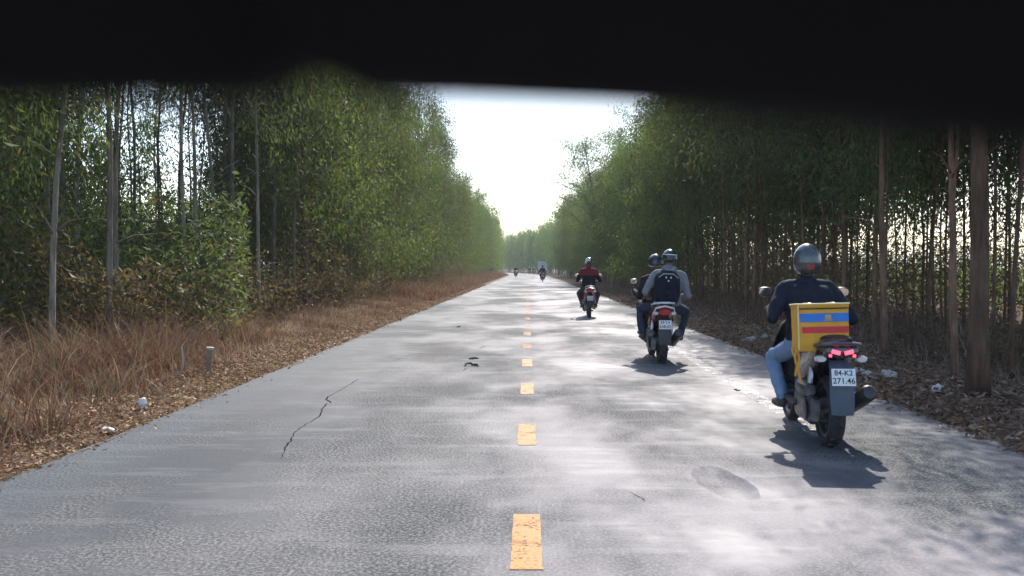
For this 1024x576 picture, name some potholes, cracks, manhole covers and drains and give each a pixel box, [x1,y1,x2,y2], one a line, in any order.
crack [277,355,407,461]
pothole [691,466,761,502]
